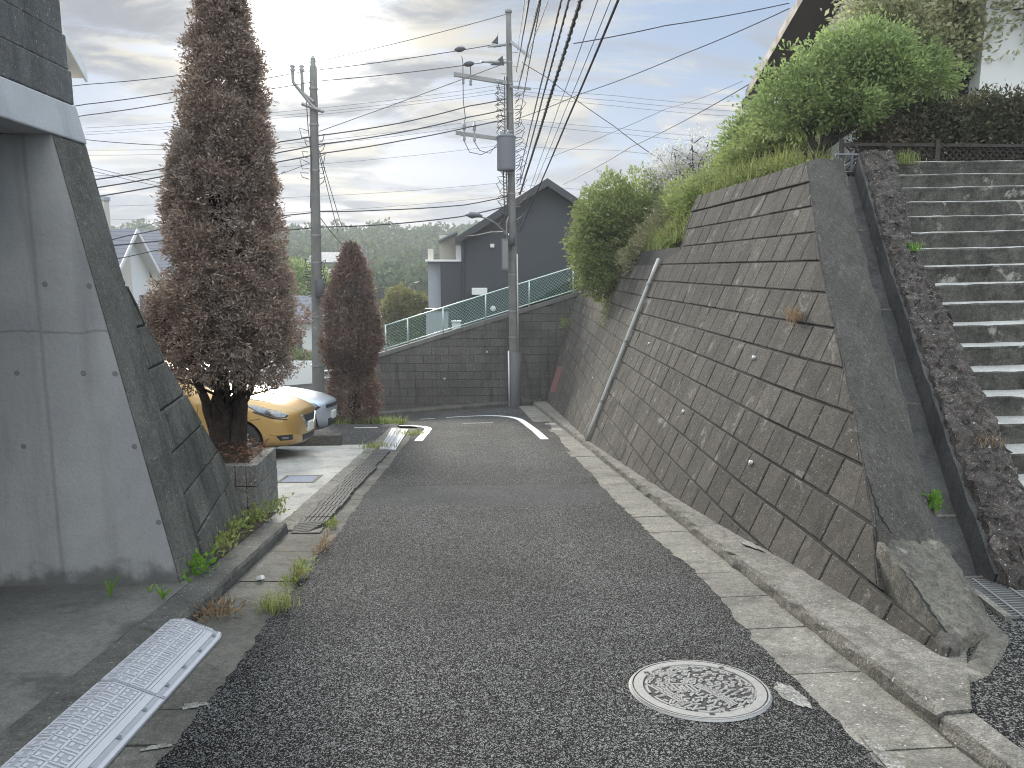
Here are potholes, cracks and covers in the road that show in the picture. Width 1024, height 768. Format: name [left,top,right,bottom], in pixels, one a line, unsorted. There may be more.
manhole cover [629,660,772,722]
drain grate [964,576,1024,621]
